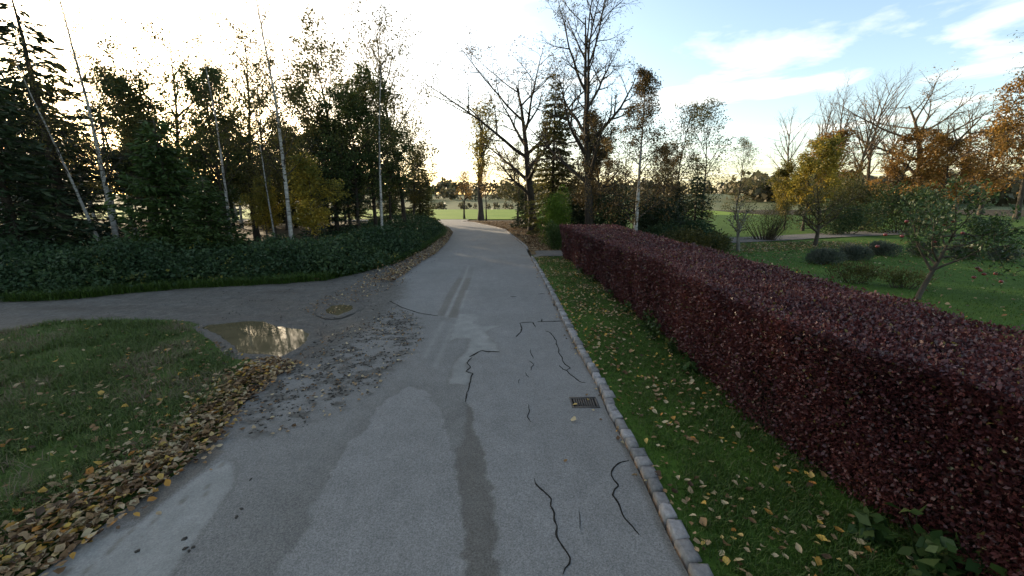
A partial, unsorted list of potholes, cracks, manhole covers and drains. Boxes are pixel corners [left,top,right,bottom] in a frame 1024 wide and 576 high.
pothole [194,318,323,362]
crack [534,478,580,574]
crack [465,350,498,402]
crack [611,460,639,535]
crack [516,319,586,383]
drain grate [569,397,600,408]
